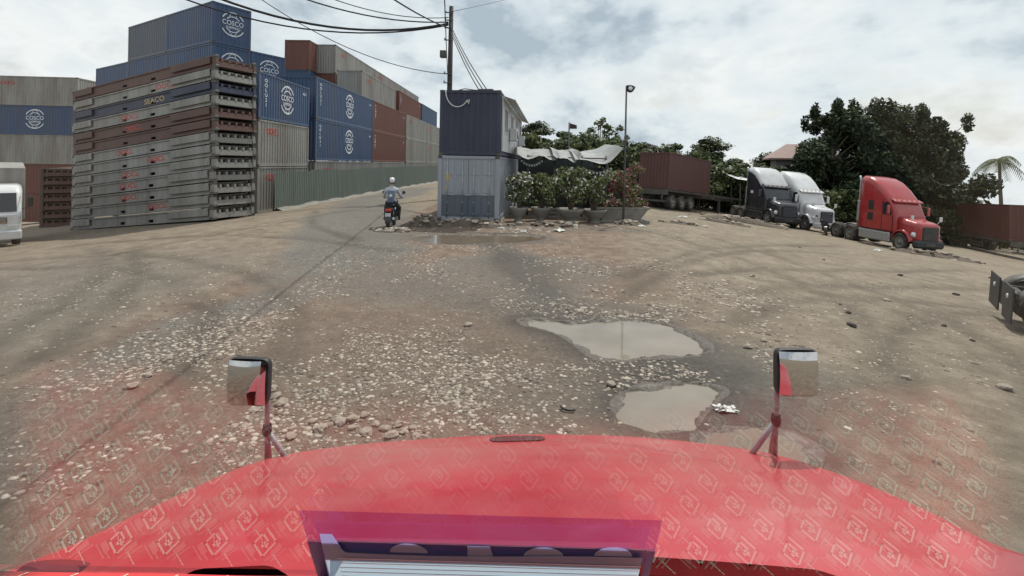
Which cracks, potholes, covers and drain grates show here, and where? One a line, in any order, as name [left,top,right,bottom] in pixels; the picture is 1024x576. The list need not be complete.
pothole [403,233,550,245]
pothole [609,381,730,434]
pothole [517,317,715,362]
